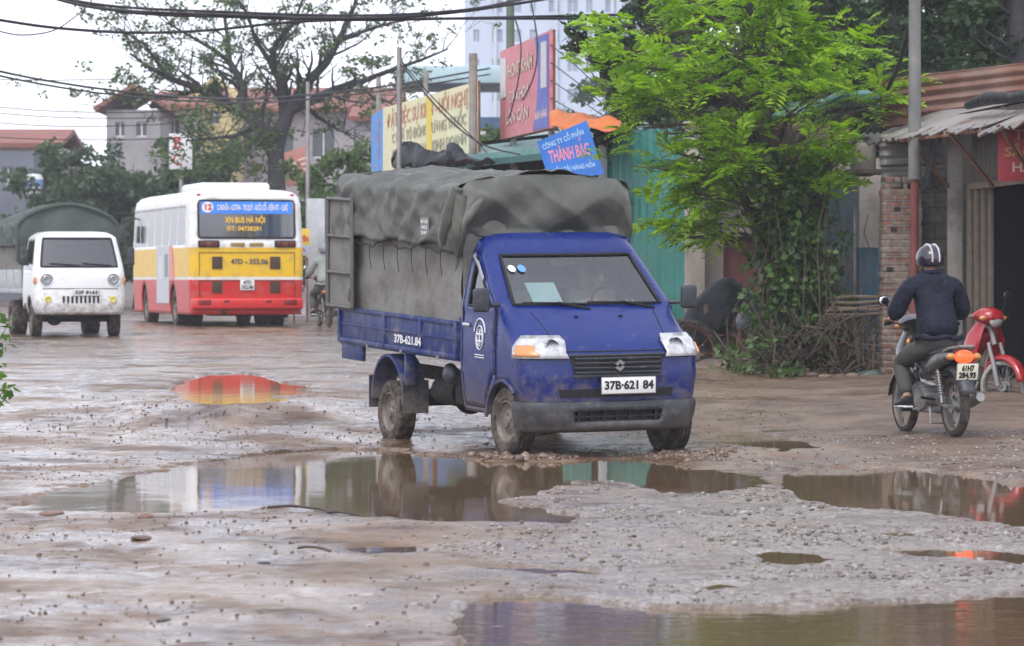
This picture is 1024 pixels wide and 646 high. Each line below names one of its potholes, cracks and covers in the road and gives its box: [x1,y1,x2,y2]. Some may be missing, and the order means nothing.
pothole [0,447,774,523]
pothole [738,545,865,565]
pothole [768,465,1024,526]
pothole [326,541,442,554]
pothole [691,427,835,452]
pothole [868,541,1024,564]
pothole [427,588,1024,646]
pothole [152,372,319,404]
